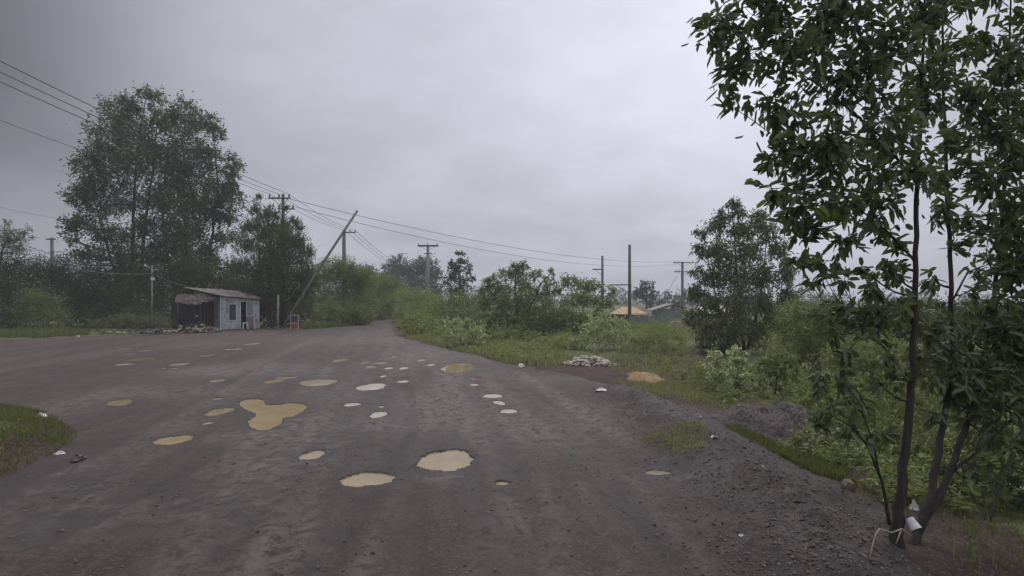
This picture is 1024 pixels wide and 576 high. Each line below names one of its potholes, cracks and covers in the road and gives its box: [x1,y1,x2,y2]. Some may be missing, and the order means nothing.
pothole [338,471,398,487]
pothole [203,407,236,416]
pothole [414,448,476,471]
pothole [440,363,476,373]
pothole [355,383,386,391]
pothole [298,449,326,460]
pothole [152,435,194,445]
pothole [239,398,307,430]
